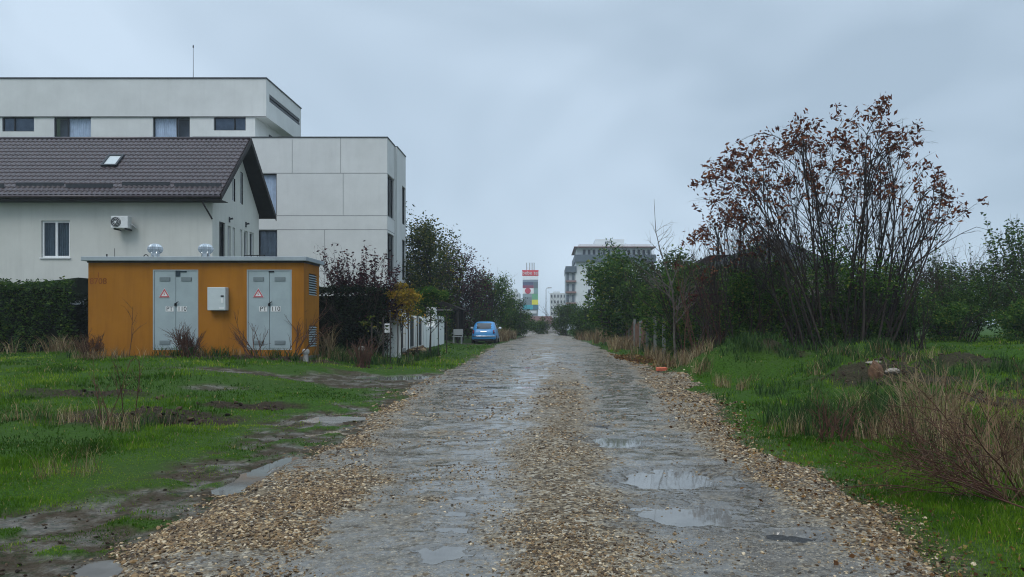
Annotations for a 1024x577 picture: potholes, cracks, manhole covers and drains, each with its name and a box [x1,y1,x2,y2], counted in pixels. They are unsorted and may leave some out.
pothole [398,542,487,571]
pothole [568,433,658,451]
pothole [621,497,780,538]
pothole [596,464,772,506]
